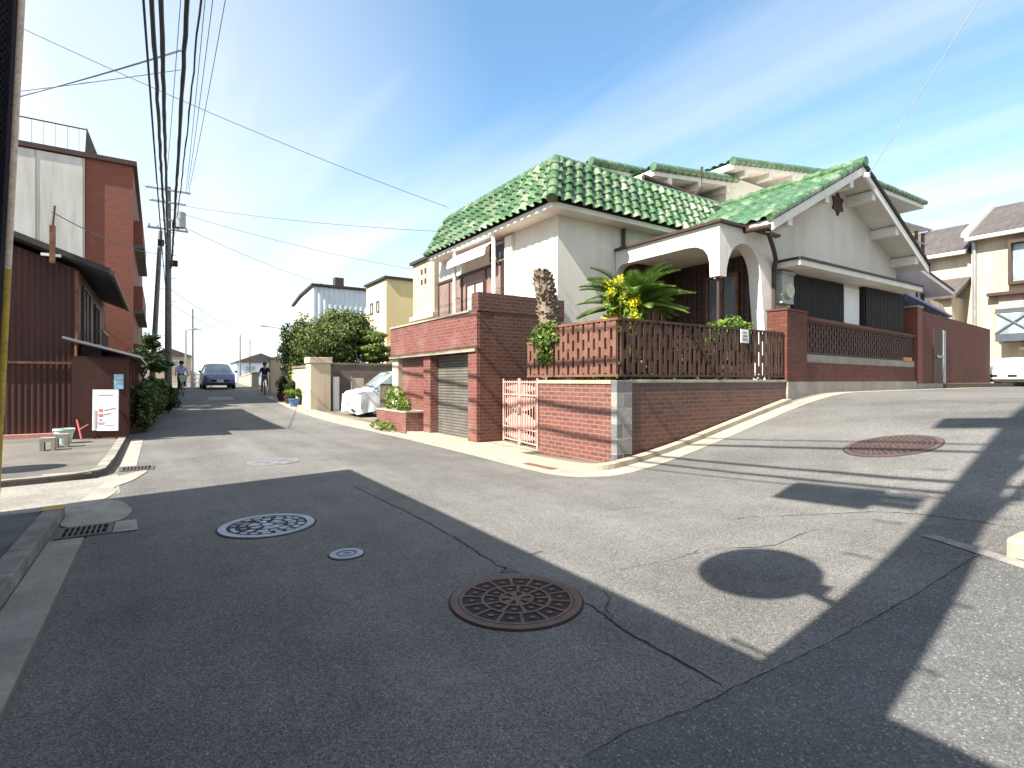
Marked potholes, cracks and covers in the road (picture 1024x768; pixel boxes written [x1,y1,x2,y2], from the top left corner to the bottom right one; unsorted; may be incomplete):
crack [358,488,721,684]
drain grate [53,522,114,541]
manhole cover [448,575,584,632]
manhole cover [328,548,365,561]
manhole cover [843,435,945,457]
manhole cover [247,458,300,466]
manhole cover [215,513,316,539]
